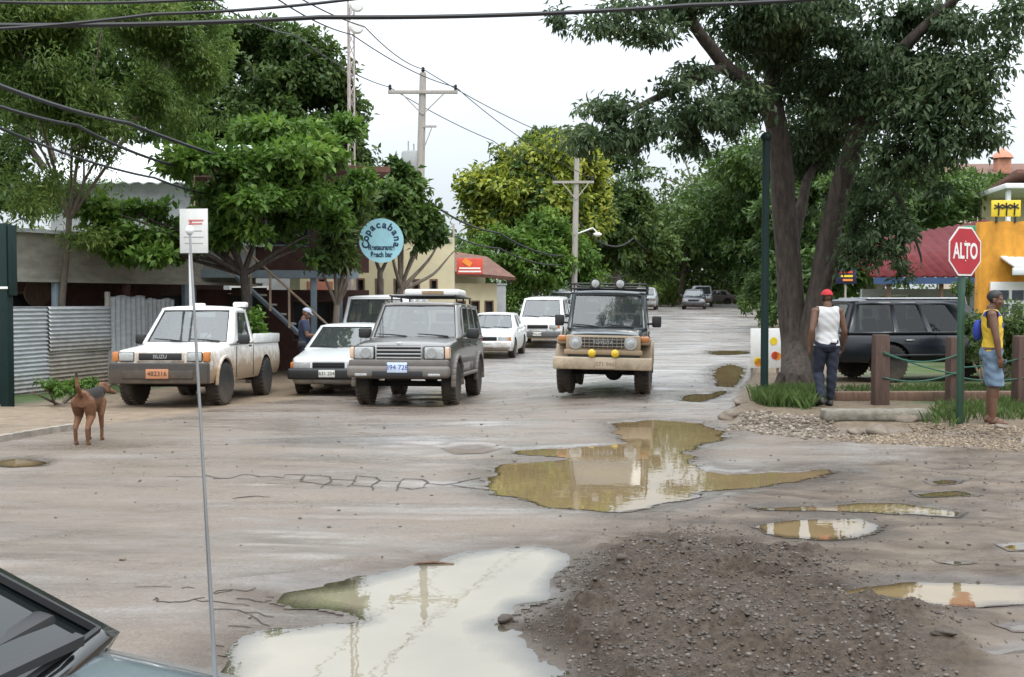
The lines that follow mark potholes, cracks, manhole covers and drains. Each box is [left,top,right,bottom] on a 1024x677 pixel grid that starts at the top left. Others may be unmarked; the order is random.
crack [145,586,273,628]
pothole [480,419,841,513]
pothole [677,390,730,402]
pothole [0,456,51,468]
pothole [748,500,968,518]
pothole [441,443,502,454]
crack [166,474,479,491]
pothole [827,576,1024,608]
pothole [749,515,890,541]
pothole [711,363,749,387]
